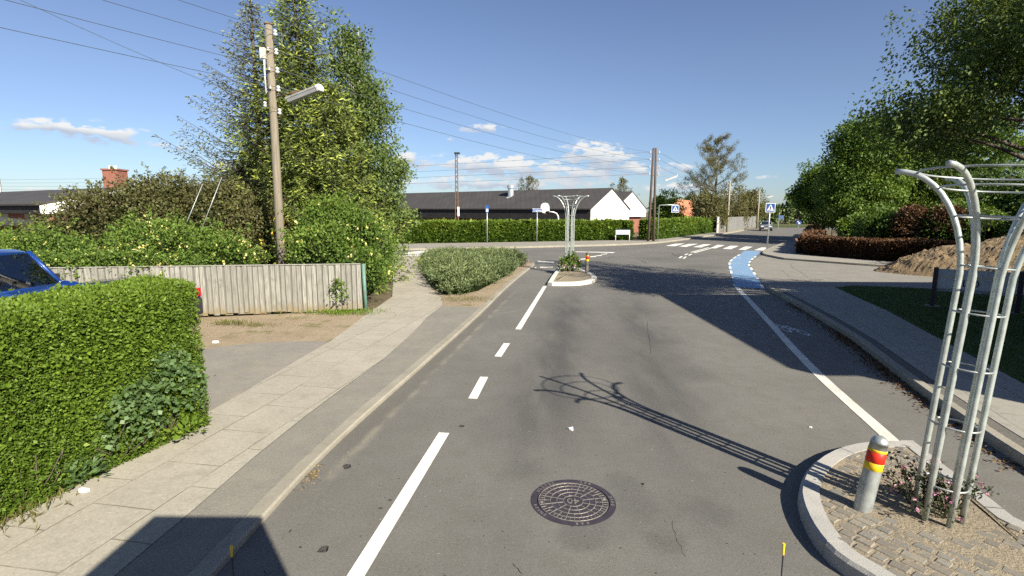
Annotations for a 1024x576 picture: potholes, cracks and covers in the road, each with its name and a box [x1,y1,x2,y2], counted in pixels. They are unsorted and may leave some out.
manhole cover [531,479,616,526]
